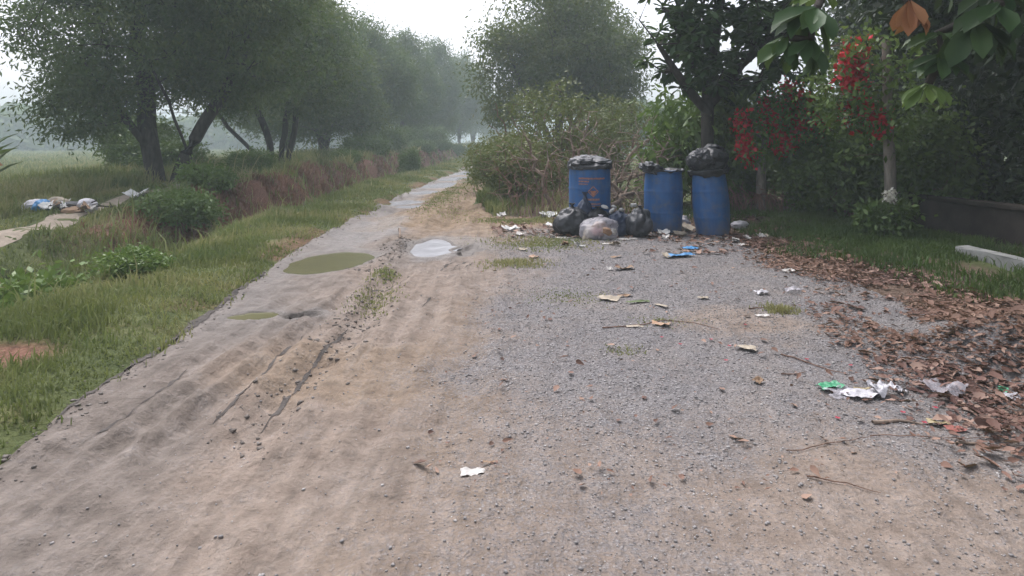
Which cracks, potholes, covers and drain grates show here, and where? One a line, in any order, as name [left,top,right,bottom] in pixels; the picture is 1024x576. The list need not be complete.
crack [213,329,348,433]
pothole [406,237,462,258]
pothole [280,310,327,320]
pothole [276,249,381,275]
